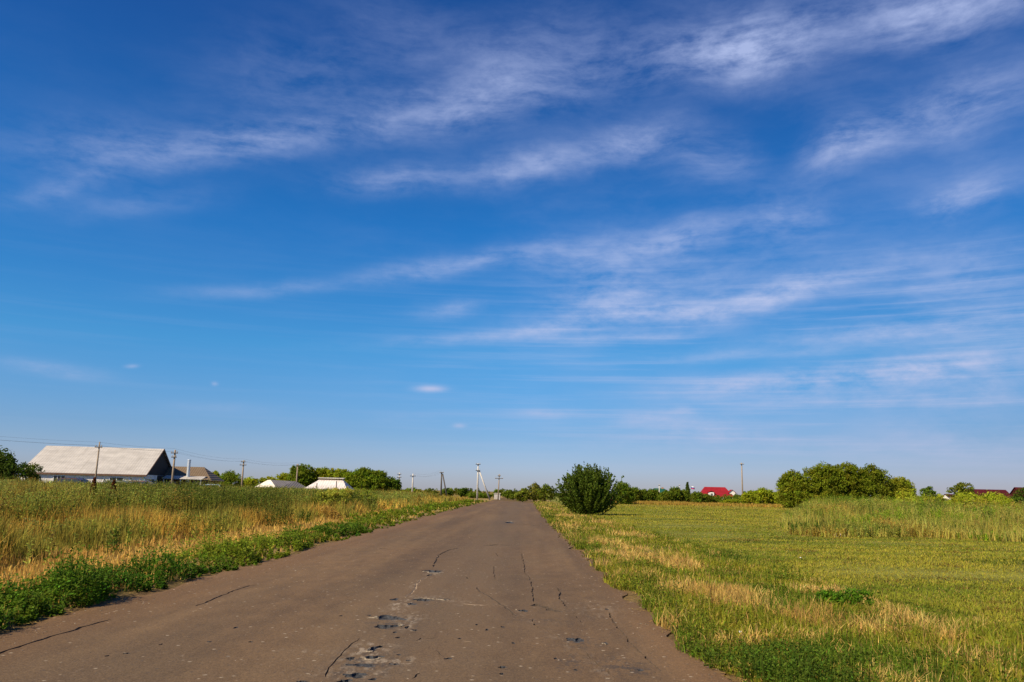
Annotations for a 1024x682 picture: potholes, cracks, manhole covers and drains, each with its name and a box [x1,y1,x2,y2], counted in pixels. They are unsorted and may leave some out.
crack [0,619,111,654]
crack [406,548,457,597]
crack [466,545,582,638]
crack [325,639,359,677]
crack [585,612,661,679]
